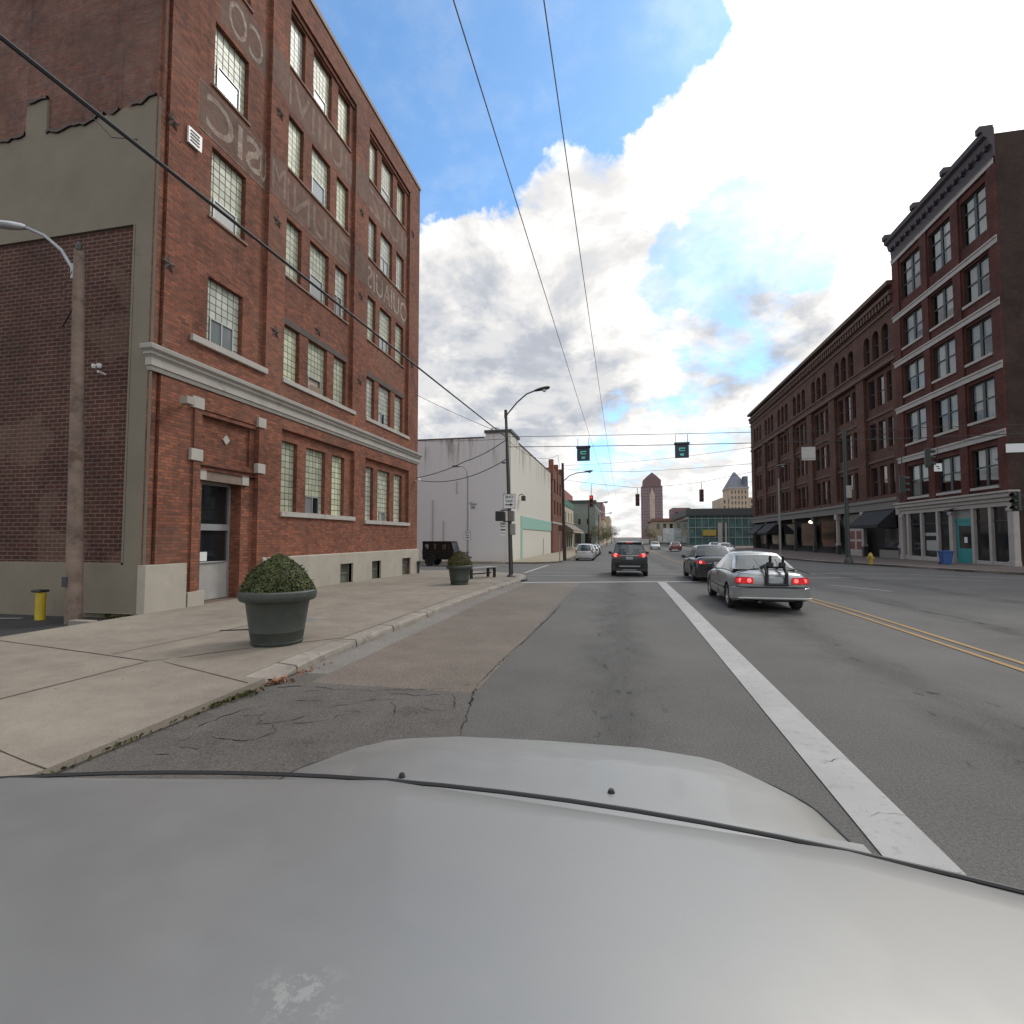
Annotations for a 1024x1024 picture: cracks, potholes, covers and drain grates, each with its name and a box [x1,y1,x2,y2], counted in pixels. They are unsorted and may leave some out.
crack [144,684,467,766]
crack [480,607,559,682]
